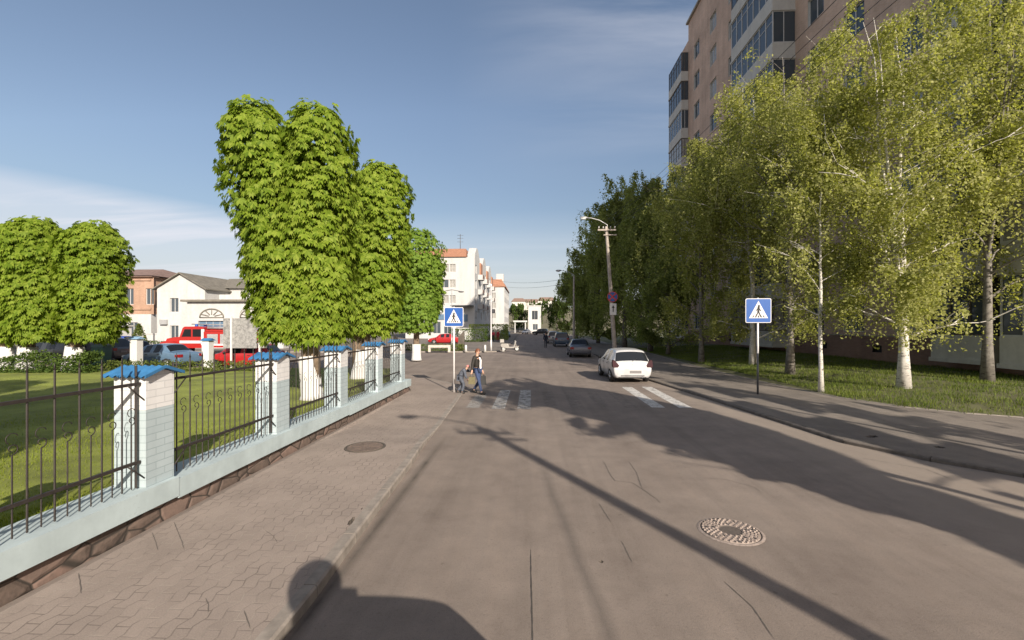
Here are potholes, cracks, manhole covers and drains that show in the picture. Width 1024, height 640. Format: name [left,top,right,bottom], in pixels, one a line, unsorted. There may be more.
crack [725,582,774,638]
manhole cover [344,441,386,453]
manhole cover [697,518,766,546]
